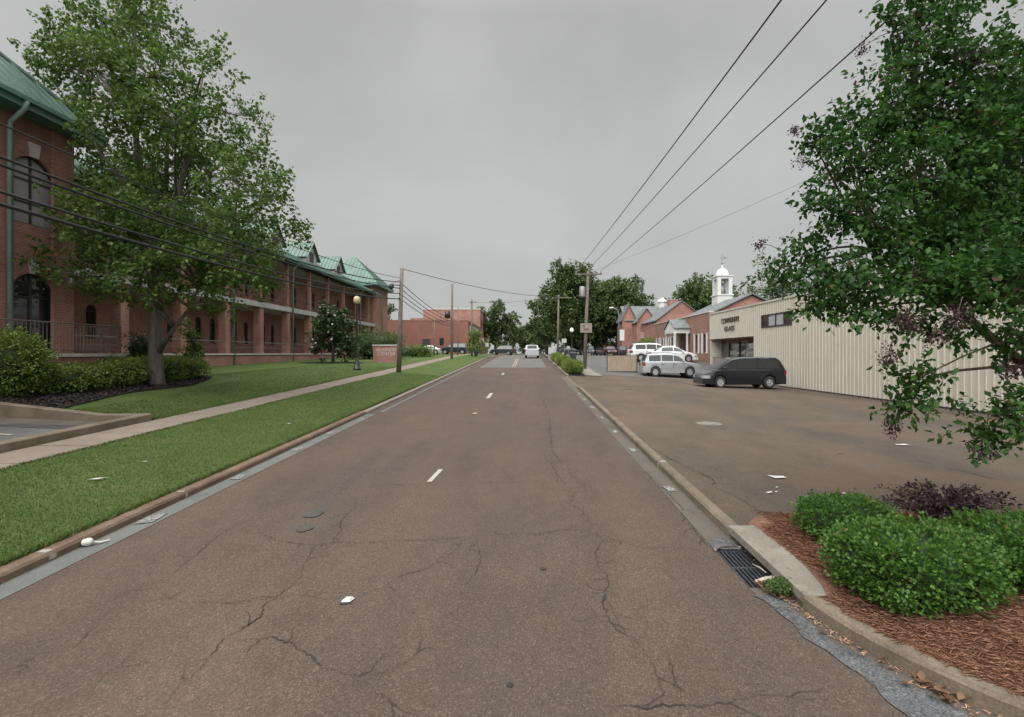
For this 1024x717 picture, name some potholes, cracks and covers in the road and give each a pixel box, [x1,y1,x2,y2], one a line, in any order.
crack [164,393,840,717]
drain grate [717,525,826,623]
